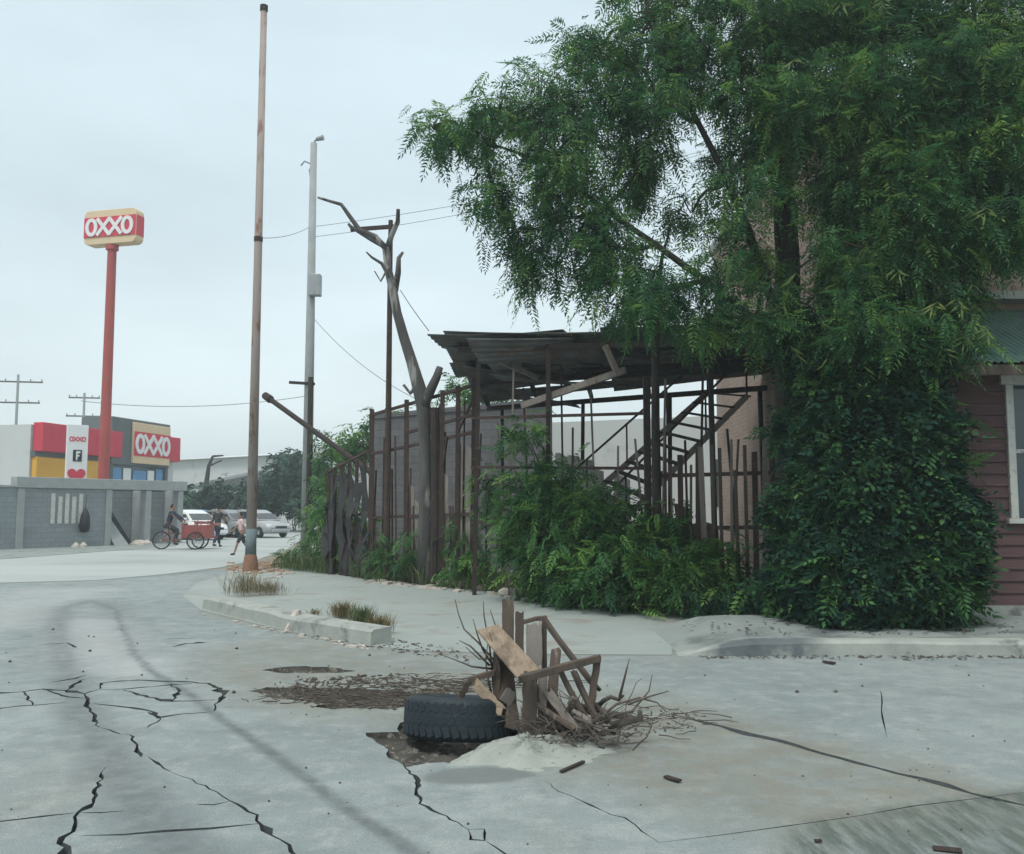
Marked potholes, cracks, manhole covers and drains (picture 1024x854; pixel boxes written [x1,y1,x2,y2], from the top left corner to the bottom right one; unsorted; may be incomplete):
crack [403,764,506,854]
pothole [251,687,410,710]
crack [546,781,1024,843]
crack [0,675,296,854]
pothole [366,722,518,768]
